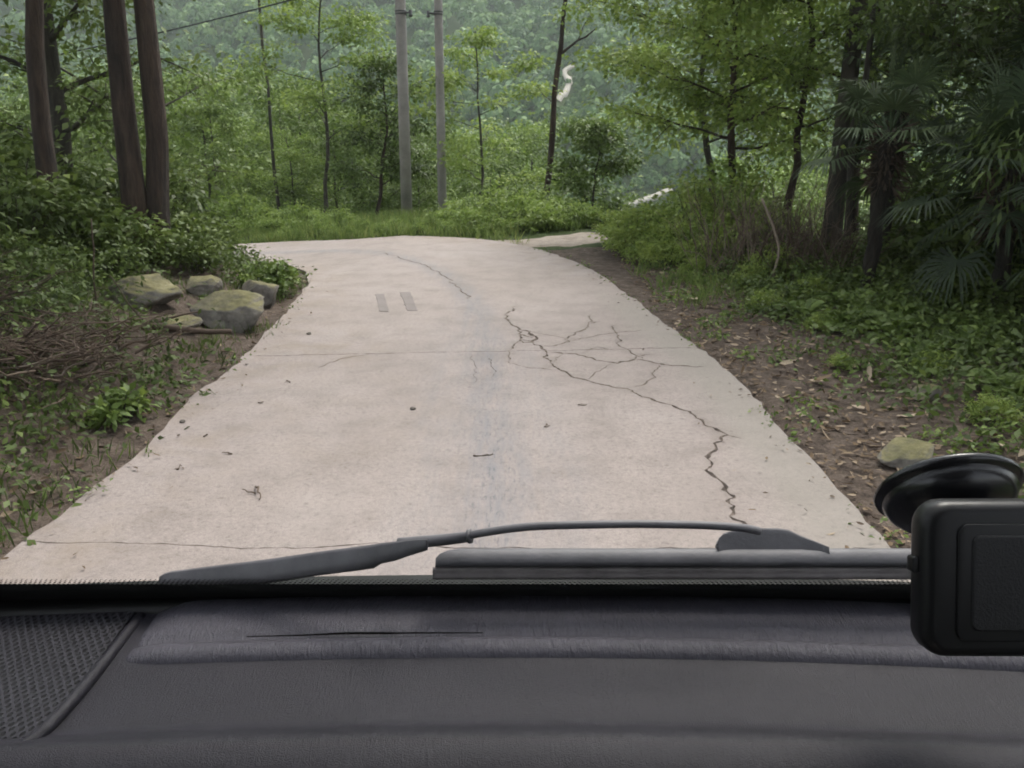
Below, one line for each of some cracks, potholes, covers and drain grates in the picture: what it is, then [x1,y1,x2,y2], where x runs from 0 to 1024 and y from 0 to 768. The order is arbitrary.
crack [504,306,747,524]
crack [386,253,471,299]
